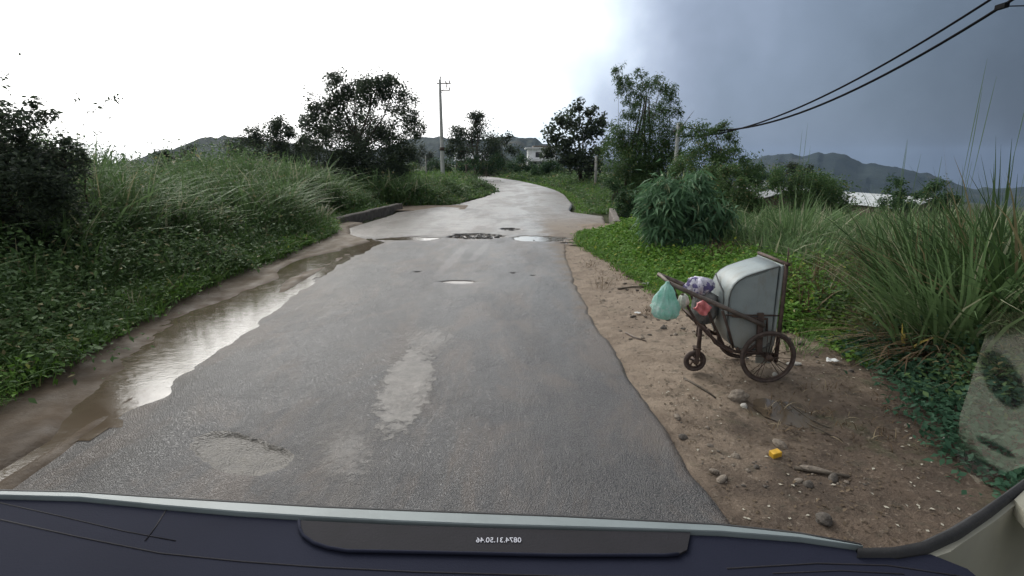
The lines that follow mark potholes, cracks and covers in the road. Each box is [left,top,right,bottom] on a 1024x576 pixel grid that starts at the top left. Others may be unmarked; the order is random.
pothole [176,426,308,483]
